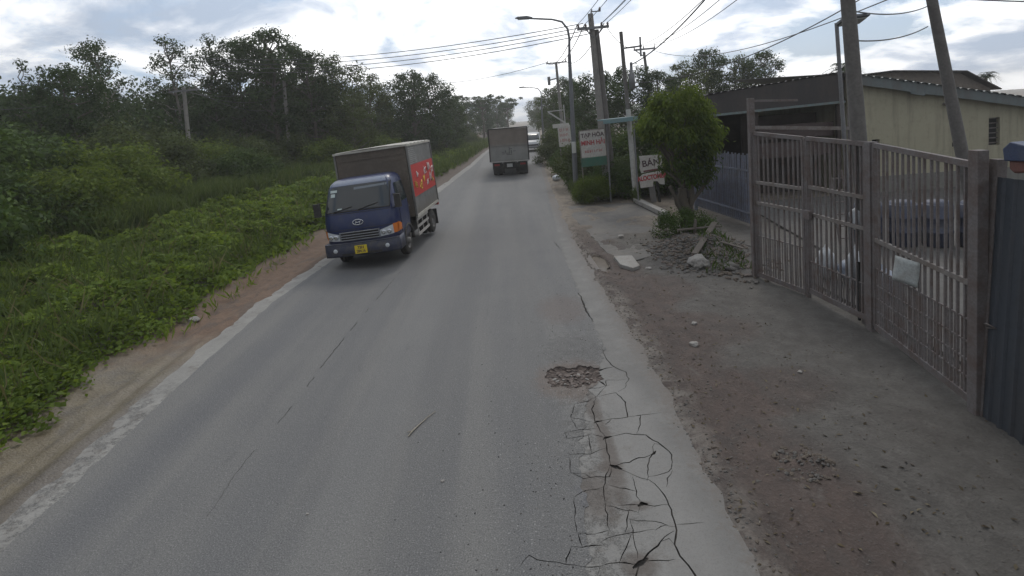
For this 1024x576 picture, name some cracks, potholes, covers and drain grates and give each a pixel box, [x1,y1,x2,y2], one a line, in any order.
pothole [545,366,604,389]
crack [521,348,703,576]
